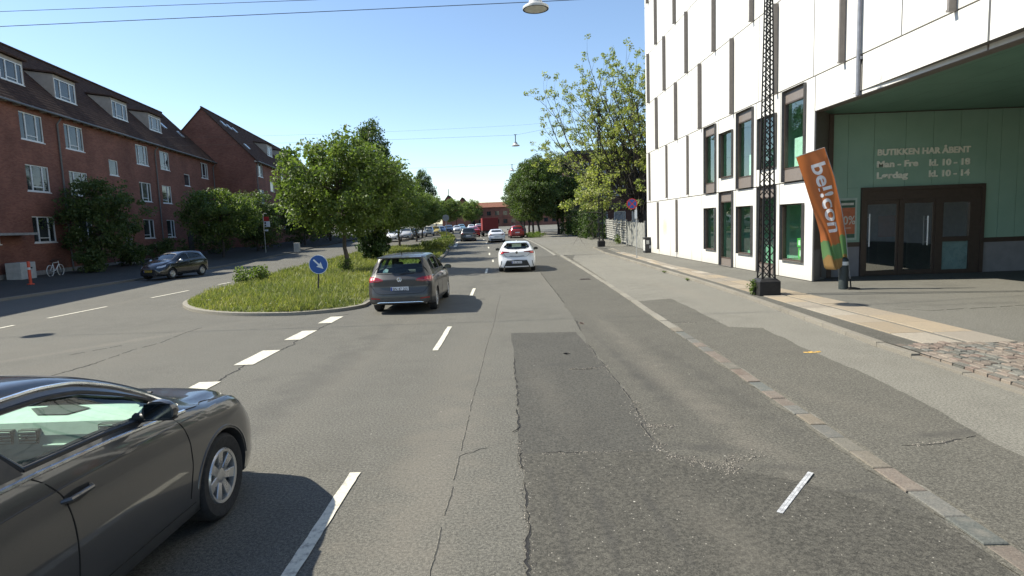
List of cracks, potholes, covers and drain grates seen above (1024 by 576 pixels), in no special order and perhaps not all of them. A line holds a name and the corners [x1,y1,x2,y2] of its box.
crack [901,436,974,446]
crack [666,449,760,476]
crack [513,358,538,576]
crack [52,328,199,376]
crack [429,298,500,576]
crack [217,314,347,382]
